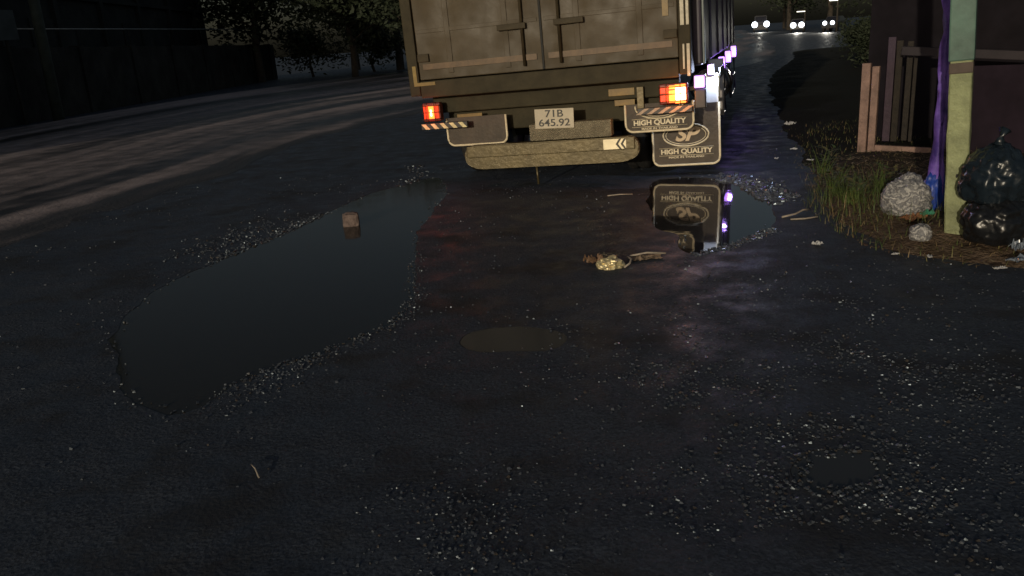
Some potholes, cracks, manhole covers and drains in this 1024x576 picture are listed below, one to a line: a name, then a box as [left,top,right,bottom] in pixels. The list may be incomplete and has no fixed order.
pothole [108,177,447,415]
pothole [790,449,892,496]
pothole [459,326,567,352]
pothole [646,177,776,254]
